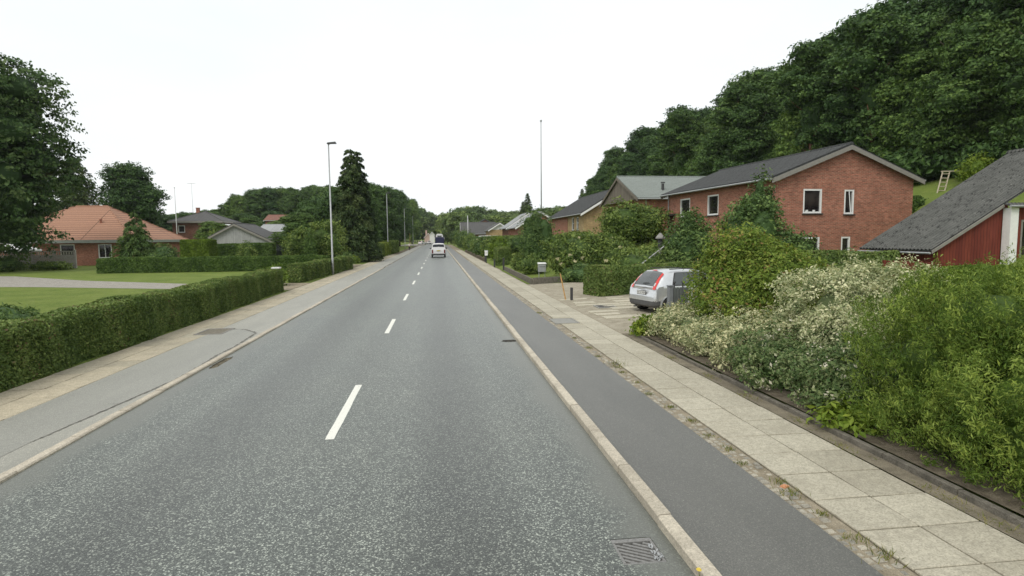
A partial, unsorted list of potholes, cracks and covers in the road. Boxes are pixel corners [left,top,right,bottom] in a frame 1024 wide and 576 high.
drain grate [610,537,667,565]
